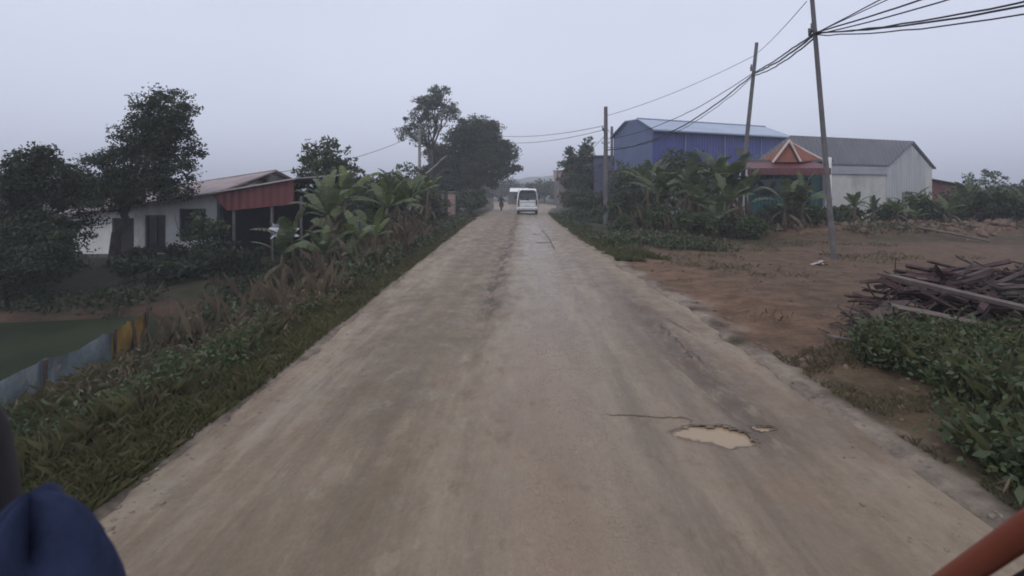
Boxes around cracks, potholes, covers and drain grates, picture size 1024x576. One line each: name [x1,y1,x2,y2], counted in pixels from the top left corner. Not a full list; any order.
crack [609,414,693,424]
pothole [750,425,778,433]
crack [660,319,702,362]
pothole [665,423,765,451]
